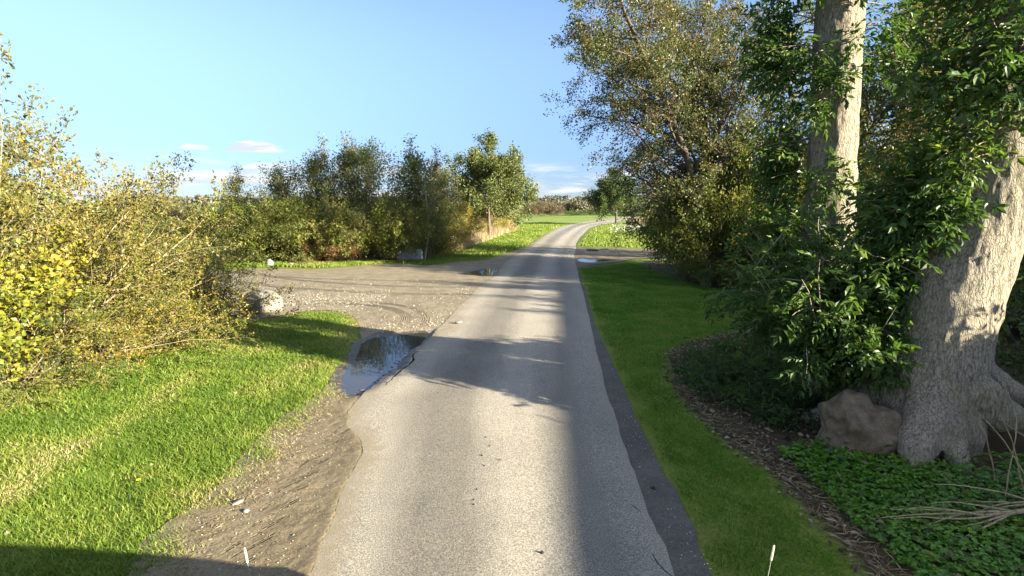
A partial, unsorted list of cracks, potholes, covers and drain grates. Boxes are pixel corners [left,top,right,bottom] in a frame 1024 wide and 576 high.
pothole [329,330,435,397]
pothole [457,268,500,277]
